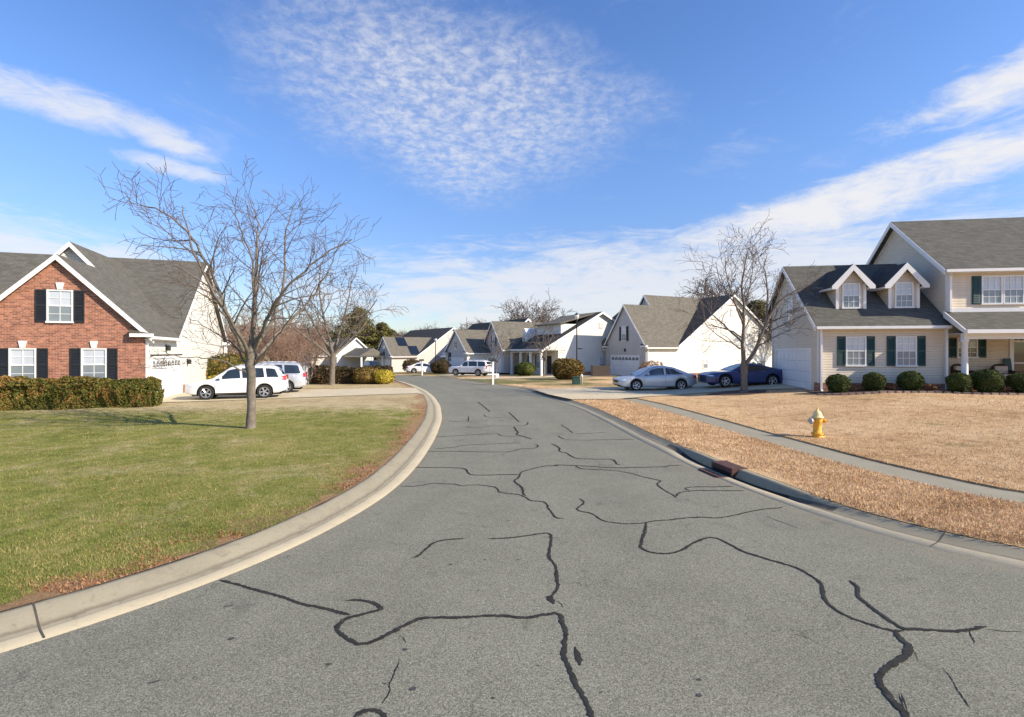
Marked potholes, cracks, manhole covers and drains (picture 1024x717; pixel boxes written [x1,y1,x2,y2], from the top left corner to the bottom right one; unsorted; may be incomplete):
drain grate [699,460,748,479]
